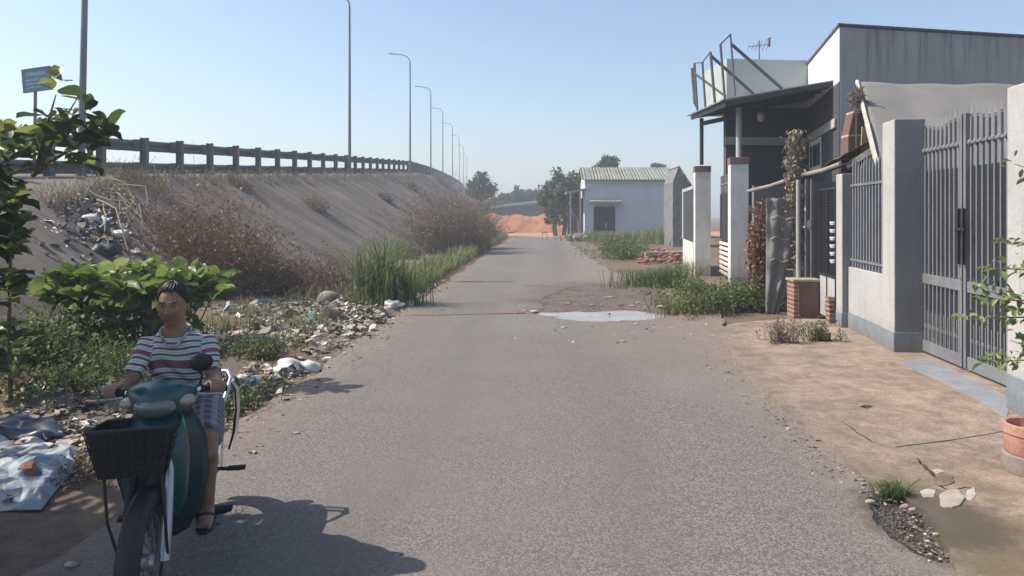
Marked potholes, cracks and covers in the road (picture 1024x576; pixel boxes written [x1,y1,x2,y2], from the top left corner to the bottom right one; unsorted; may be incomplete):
pothole [866,495,950,564]
crack [918,459,976,490]
